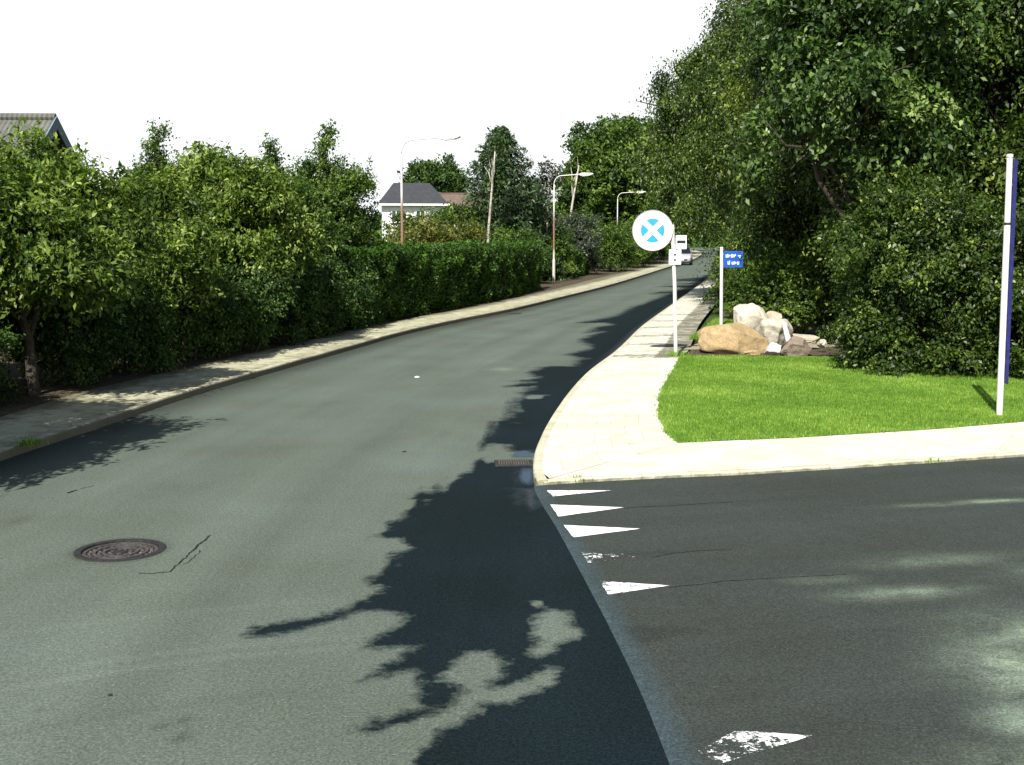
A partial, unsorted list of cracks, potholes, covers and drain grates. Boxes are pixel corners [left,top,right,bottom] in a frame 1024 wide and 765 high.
crack [674,574,847,587]
manhole cover [73,538,167,562]
crack [157,535,210,573]
drain grate [494,459,533,467]
